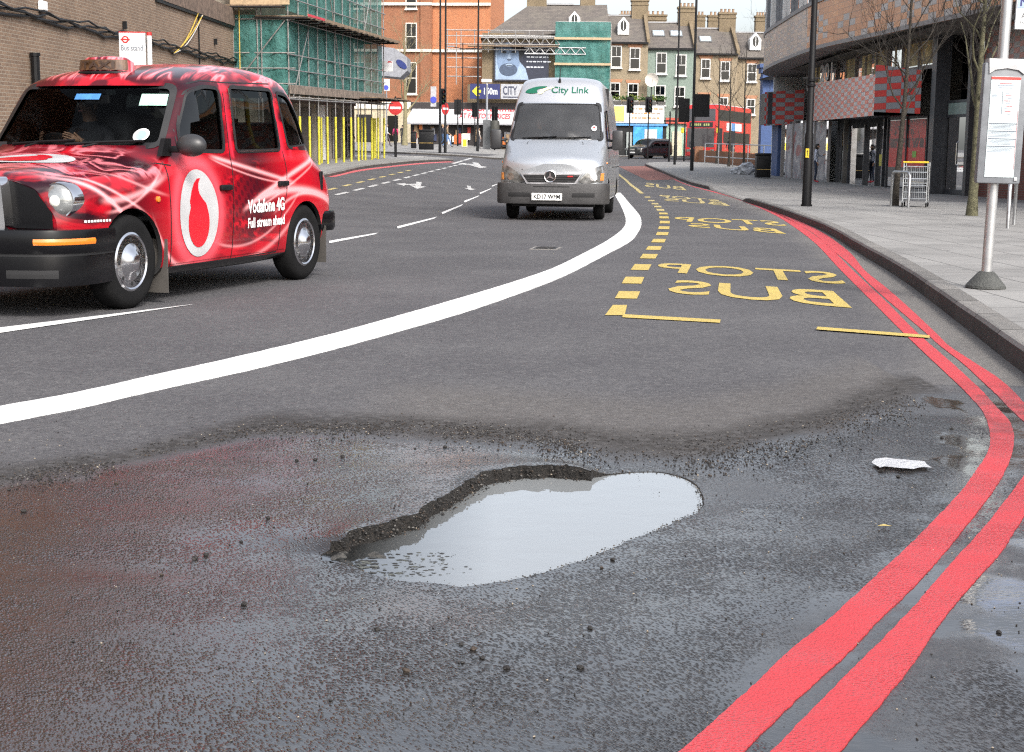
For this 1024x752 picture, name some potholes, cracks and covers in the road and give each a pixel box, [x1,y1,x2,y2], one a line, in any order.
pothole [321,463,710,588]
